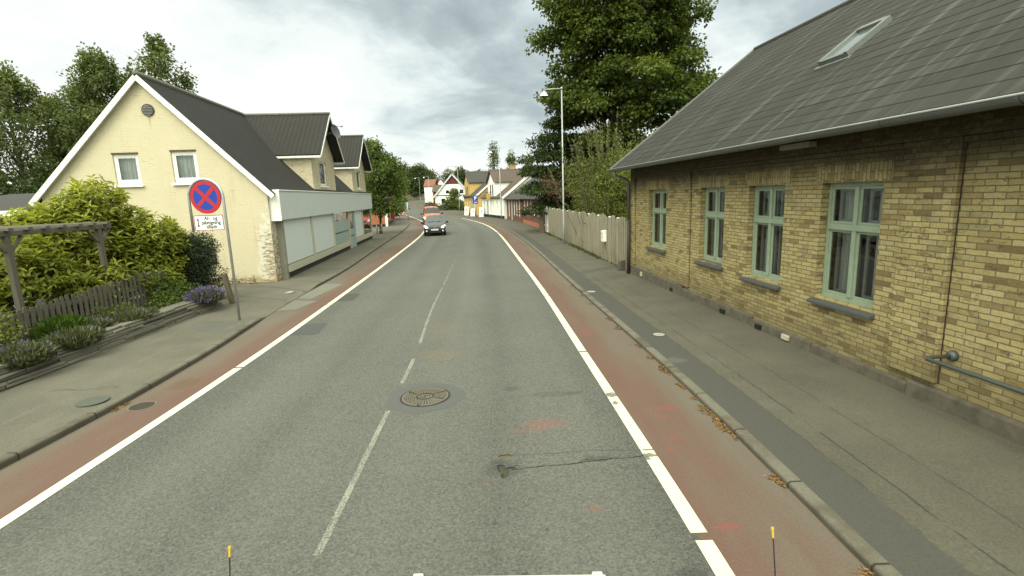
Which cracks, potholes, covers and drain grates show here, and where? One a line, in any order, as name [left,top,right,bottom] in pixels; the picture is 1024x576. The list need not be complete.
manhole cover [386,383,466,414]
pothole [497,465,515,478]
crack [512,450,643,470]
